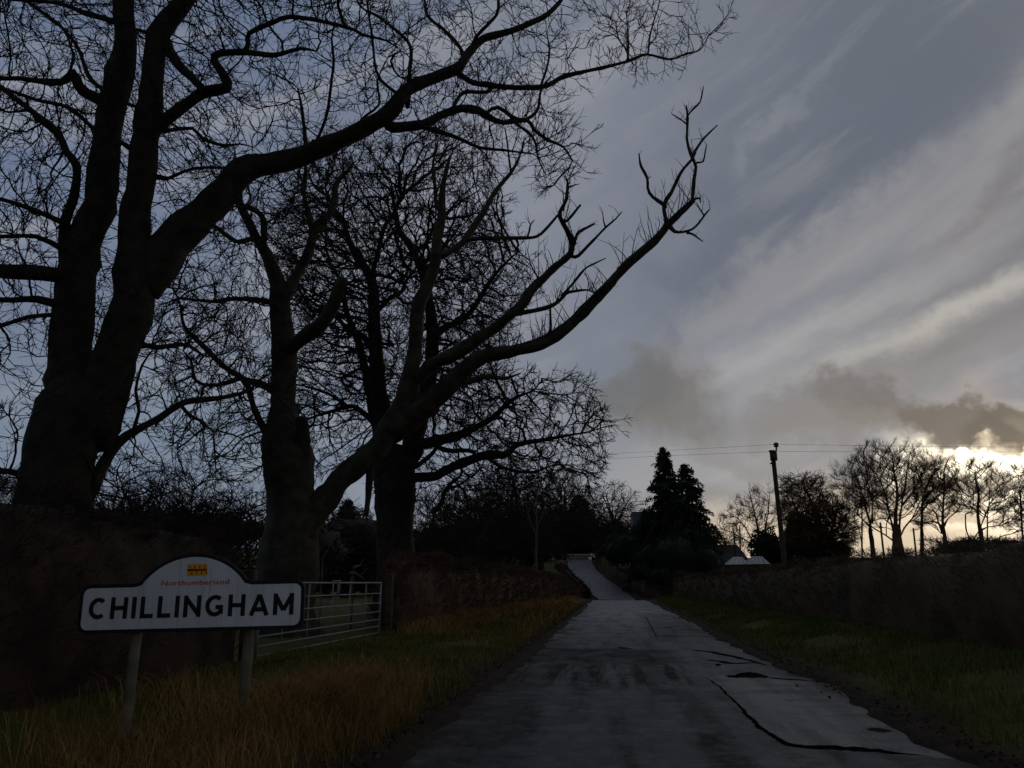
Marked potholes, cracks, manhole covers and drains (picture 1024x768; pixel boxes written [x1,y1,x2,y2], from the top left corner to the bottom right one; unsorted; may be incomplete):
crack [694,650,931,757]
